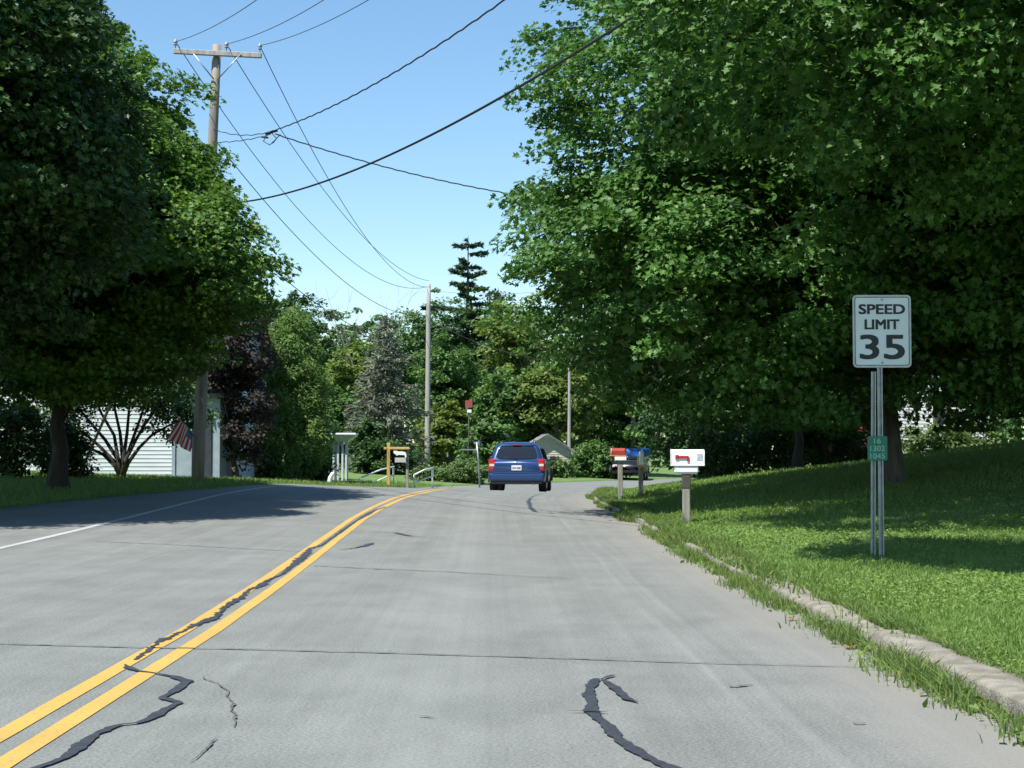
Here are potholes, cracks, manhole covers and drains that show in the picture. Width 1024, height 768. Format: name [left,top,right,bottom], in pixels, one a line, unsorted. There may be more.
crack [191,676,237,761]
